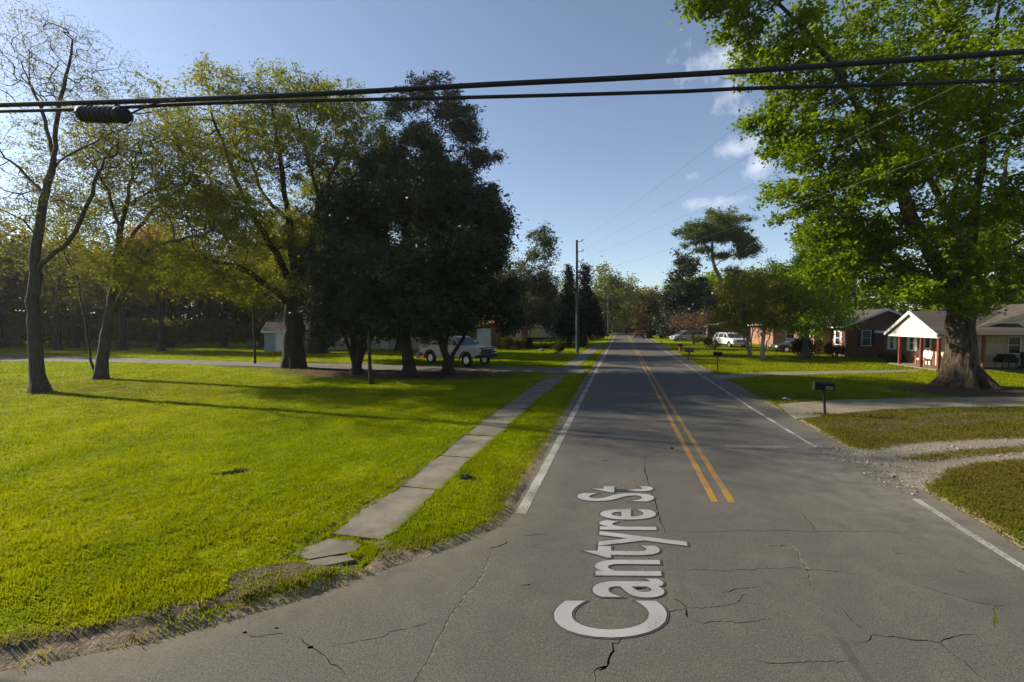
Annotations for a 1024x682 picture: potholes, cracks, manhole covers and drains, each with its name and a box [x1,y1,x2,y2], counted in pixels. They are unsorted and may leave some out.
crack [298,621,431,674]
crack [845,612,985,680]
crack [594,456,909,681]
